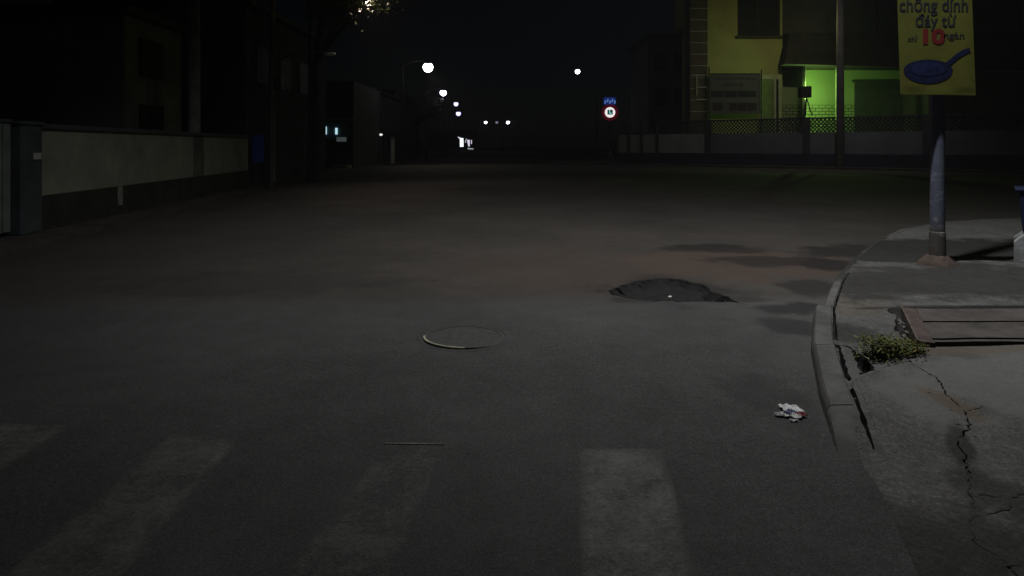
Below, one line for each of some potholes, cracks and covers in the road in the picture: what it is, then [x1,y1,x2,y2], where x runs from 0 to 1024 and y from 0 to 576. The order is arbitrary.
manhole cover [417,324,511,352]
pothole [598,277,750,305]
crack [906,363,1024,576]
